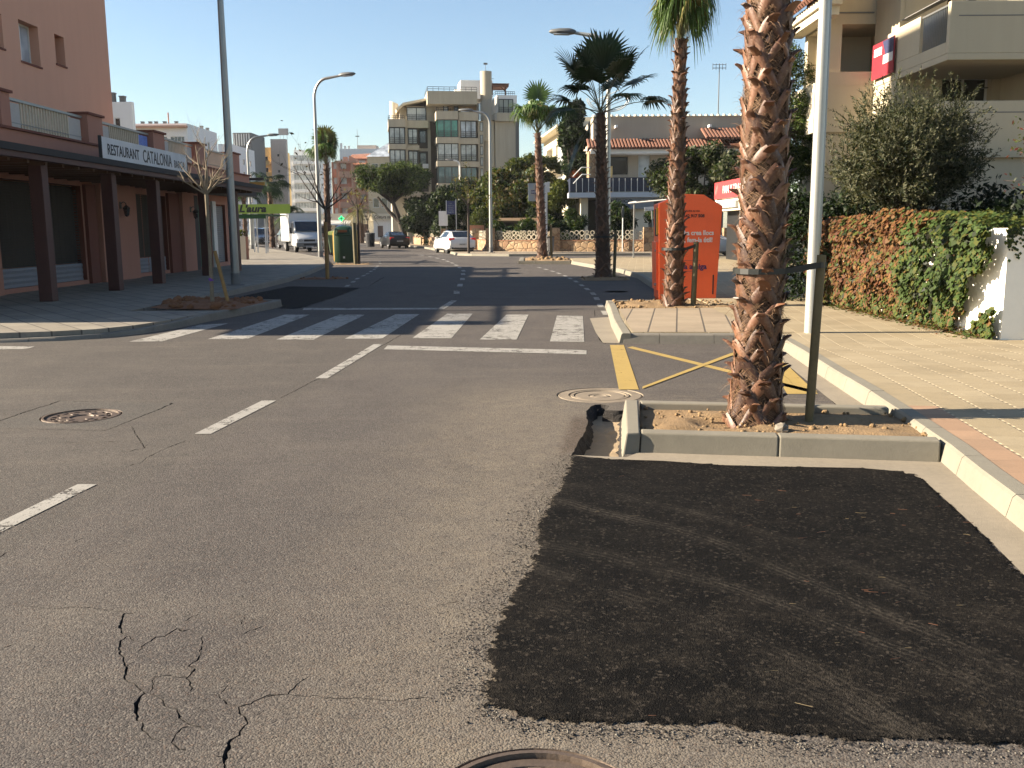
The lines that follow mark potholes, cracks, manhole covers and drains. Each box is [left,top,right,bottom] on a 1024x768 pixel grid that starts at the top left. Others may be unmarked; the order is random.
pothole [571,404,623,458]
manhole cover [456,748,615,768]
crack [15,603,432,768]
manhole cover [39,408,123,423]
manhole cover [557,388,643,405]
